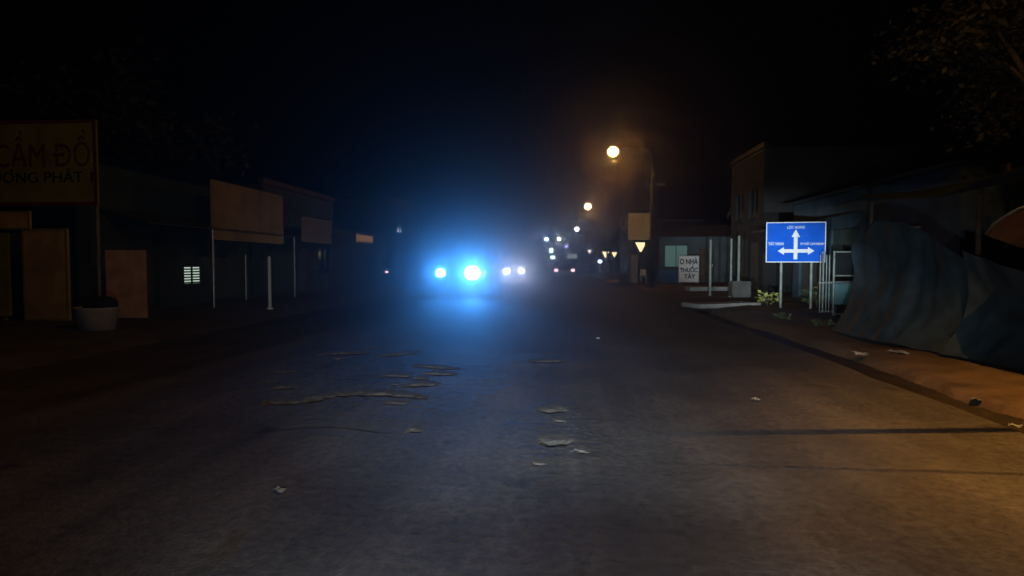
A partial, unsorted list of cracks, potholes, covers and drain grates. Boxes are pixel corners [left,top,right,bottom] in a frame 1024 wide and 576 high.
pothole [403,425,426,433]
pothole [570,445,590,454]
pothole [379,349,423,357]
pothole [259,389,431,406]
pothole [537,433,575,447]
crack [265,426,395,434]
pothole [537,404,569,414]
pothole [401,379,441,388]
